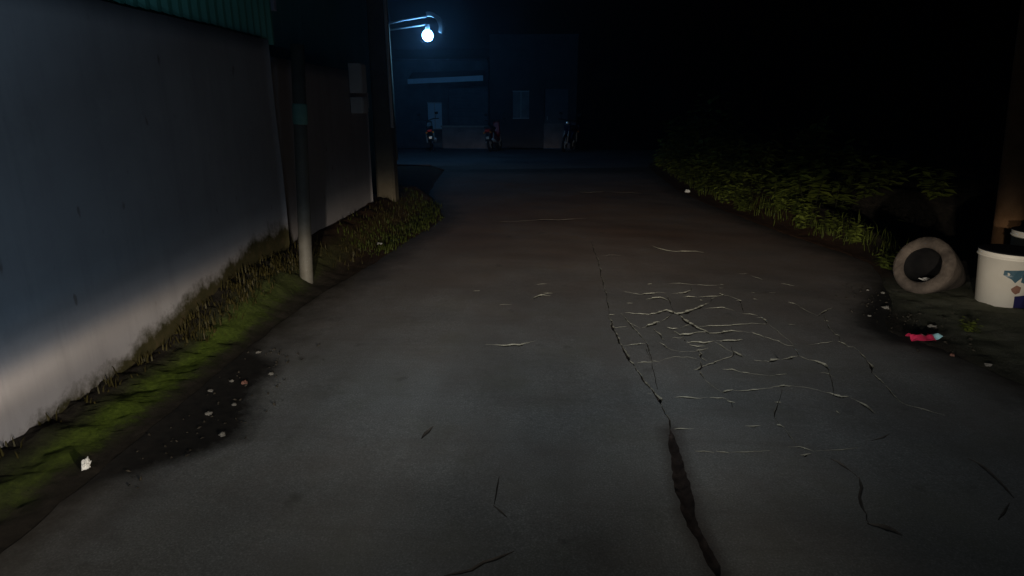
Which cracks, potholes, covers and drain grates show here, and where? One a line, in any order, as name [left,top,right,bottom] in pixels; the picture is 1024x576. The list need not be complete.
crack [493,476,507,517]
crack [591,242,942,576]
crack [444,551,515,576]
